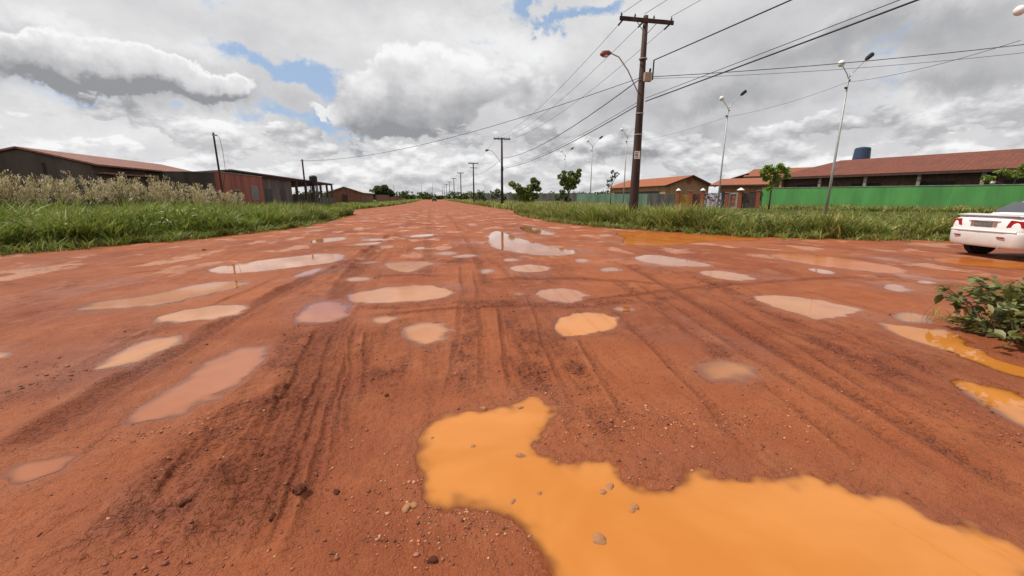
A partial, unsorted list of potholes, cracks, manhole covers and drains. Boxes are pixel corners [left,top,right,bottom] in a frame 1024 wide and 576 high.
pothole [344,284,456,304]
pothole [291,267,324,277]
pothole [205,254,346,274]
pothole [691,357,768,385]
pothole [398,321,455,346]
pothole [533,287,590,304]
pothole [874,322,1024,379]
pothole [0,451,82,491]
pothole [151,304,251,323]
pothole [751,294,864,320]
pothole [488,231,577,256]
pothole [290,299,354,324]
